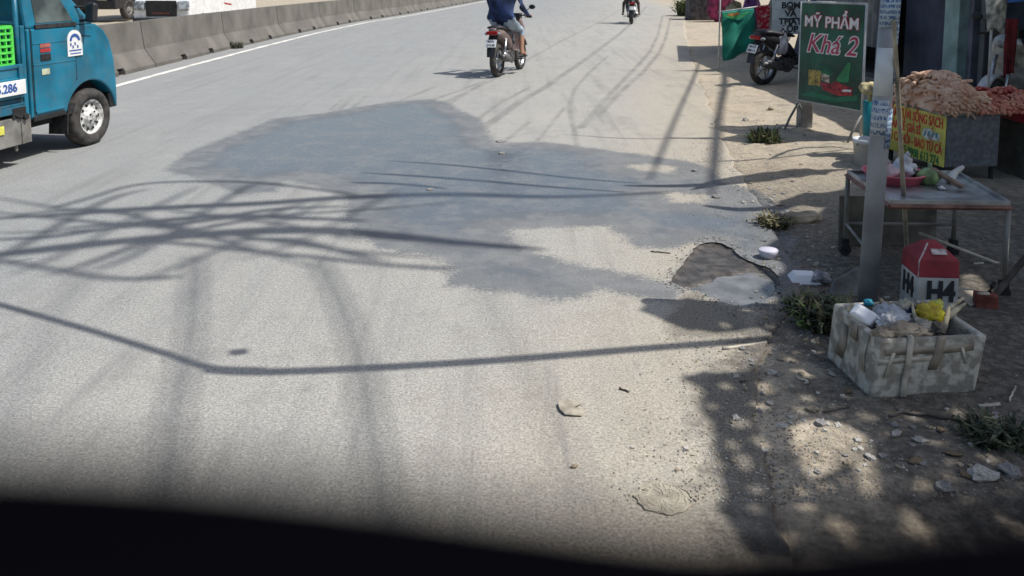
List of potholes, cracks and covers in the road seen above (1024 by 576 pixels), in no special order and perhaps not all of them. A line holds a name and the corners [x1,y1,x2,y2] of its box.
pothole [671,242,779,300]
